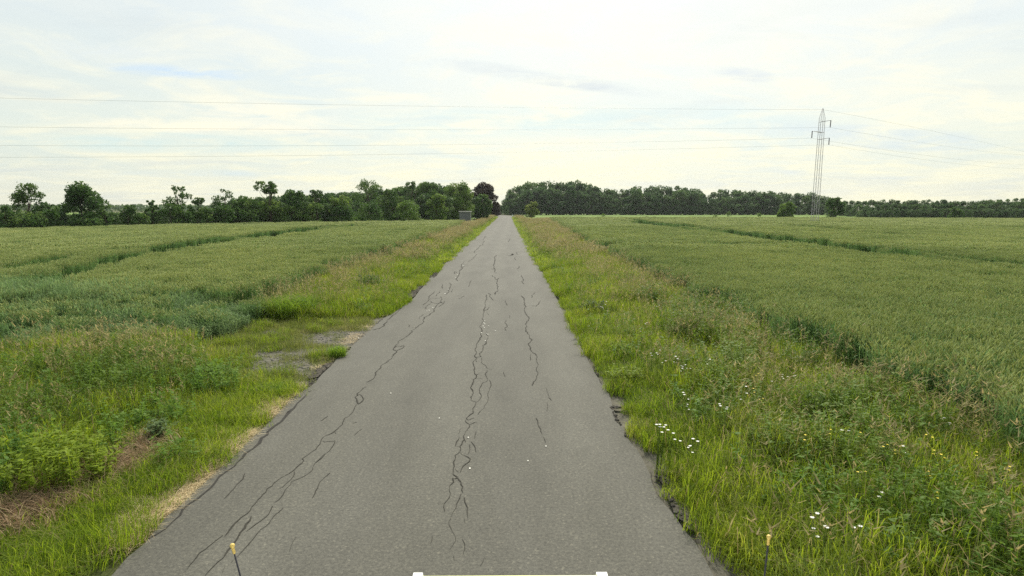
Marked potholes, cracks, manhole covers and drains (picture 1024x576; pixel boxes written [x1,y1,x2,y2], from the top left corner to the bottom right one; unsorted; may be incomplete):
crack [148,239,539,575]
